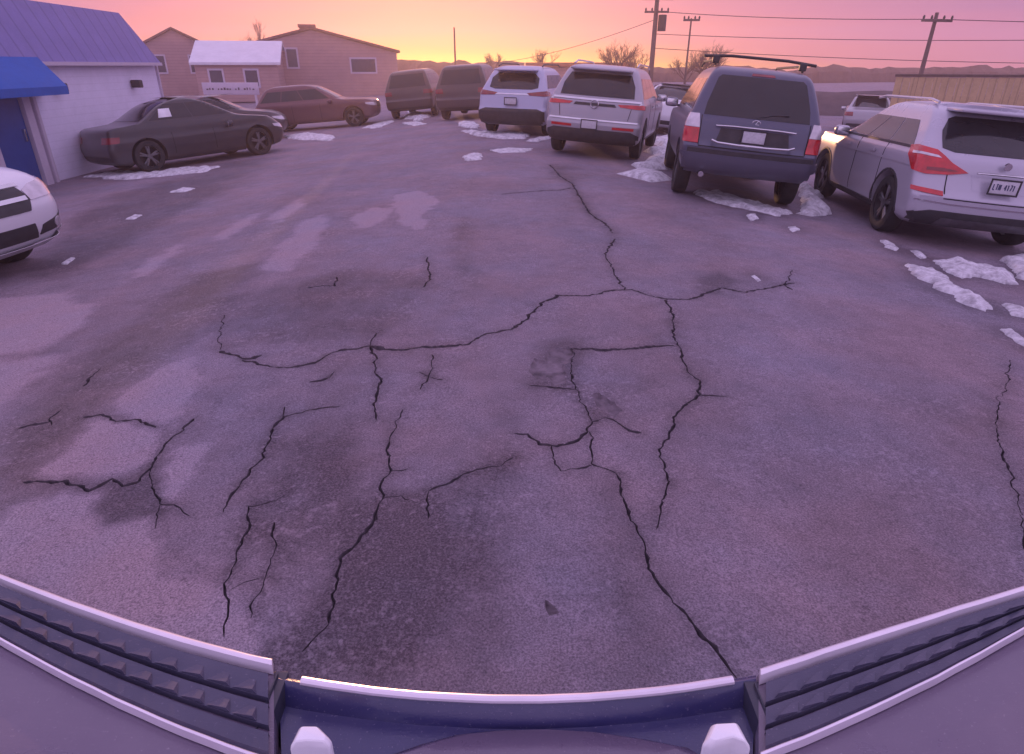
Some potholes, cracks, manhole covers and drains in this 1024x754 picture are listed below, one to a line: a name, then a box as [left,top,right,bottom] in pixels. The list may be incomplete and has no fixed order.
pothole [544,600,559,616]
crack [18,410,194,528]
crack [217,165,794,678]
crack [995,360,1024,549]
